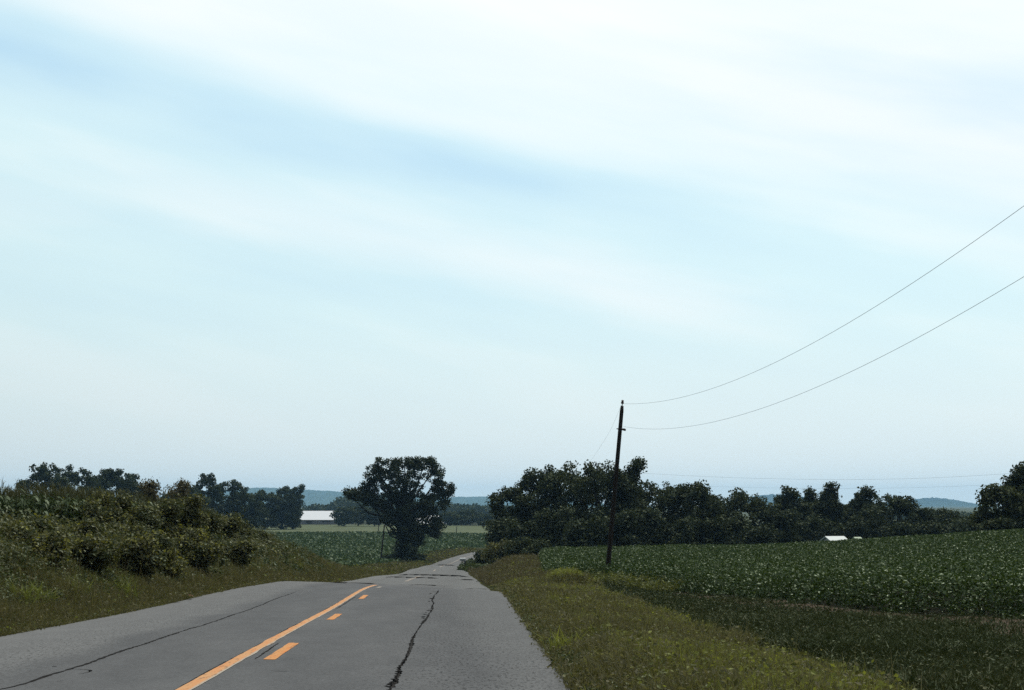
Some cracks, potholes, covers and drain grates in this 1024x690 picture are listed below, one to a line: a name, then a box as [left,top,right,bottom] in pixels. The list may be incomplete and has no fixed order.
crack [0,593,292,690]
